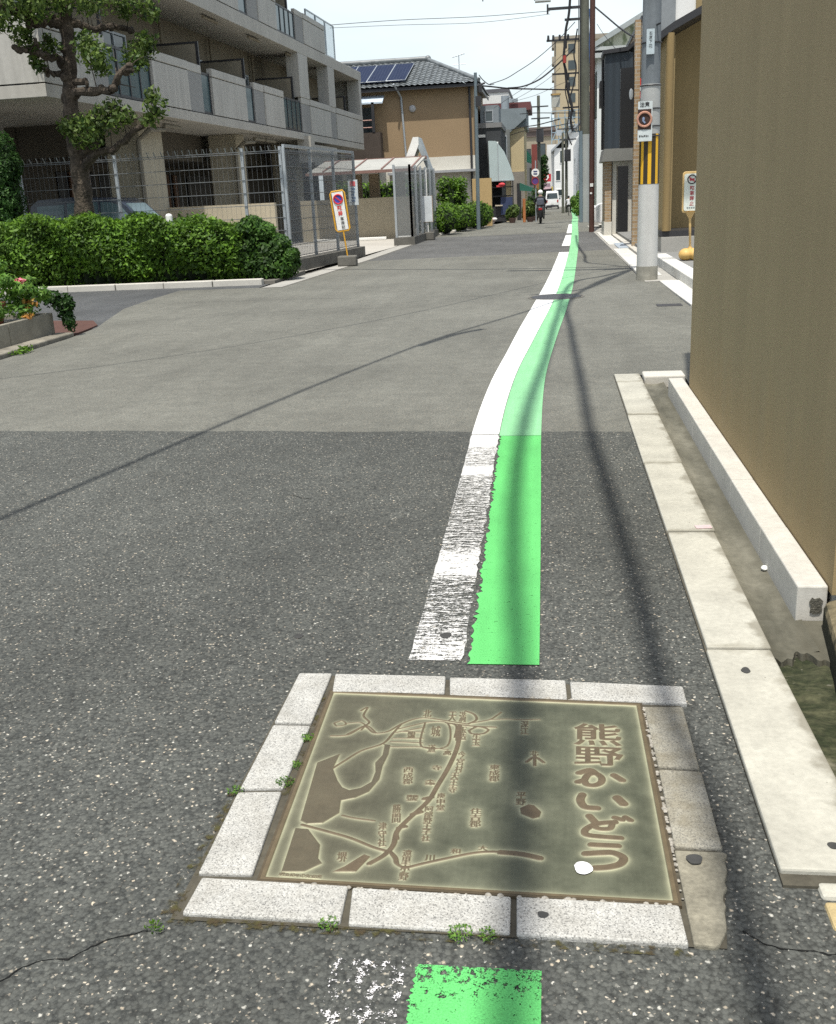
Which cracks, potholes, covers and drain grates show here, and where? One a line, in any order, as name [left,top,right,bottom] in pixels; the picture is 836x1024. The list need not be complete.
crack [0,930,148,981]
crack [743,930,836,955]
